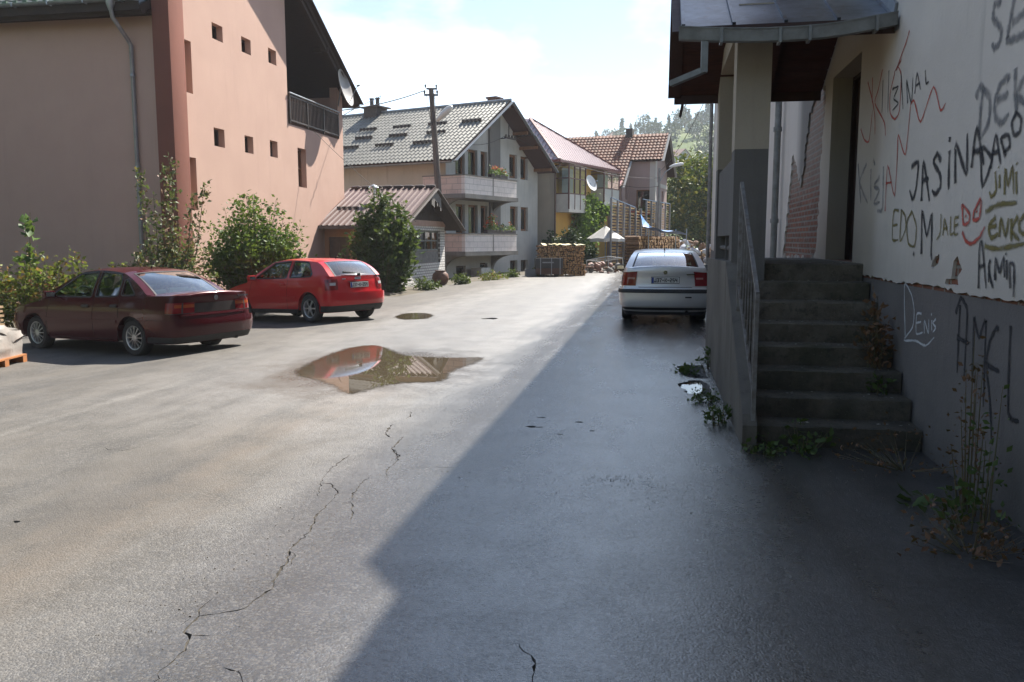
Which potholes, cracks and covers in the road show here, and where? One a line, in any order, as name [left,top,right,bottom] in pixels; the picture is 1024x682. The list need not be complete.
crack [154,412,412,682]
crack [519,644,537,682]
